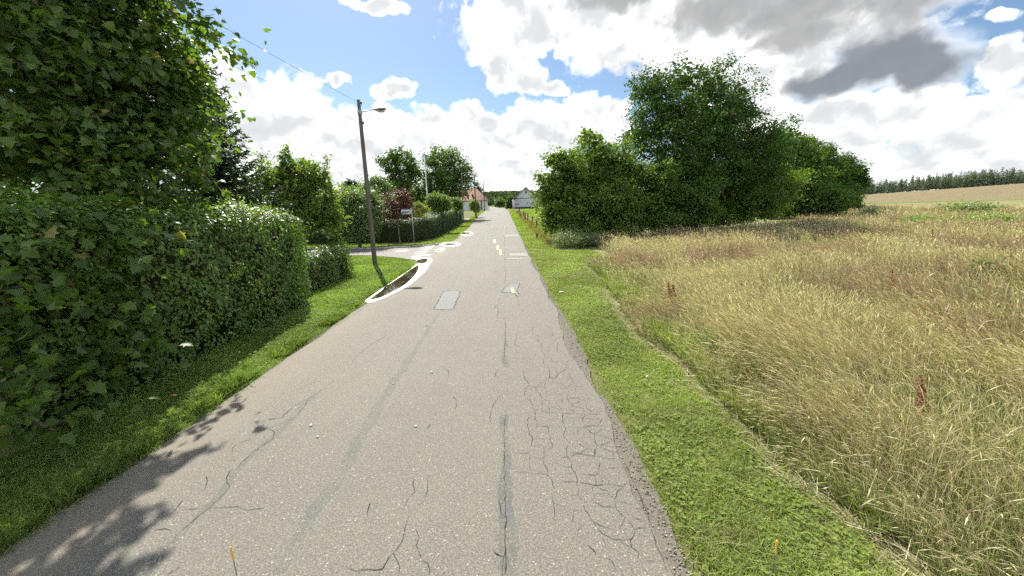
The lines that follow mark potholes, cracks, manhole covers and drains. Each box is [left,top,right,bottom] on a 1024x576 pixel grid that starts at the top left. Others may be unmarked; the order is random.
crack [154,386,326,548]
crack [350,475,430,573]
crack [494,297,668,571]
